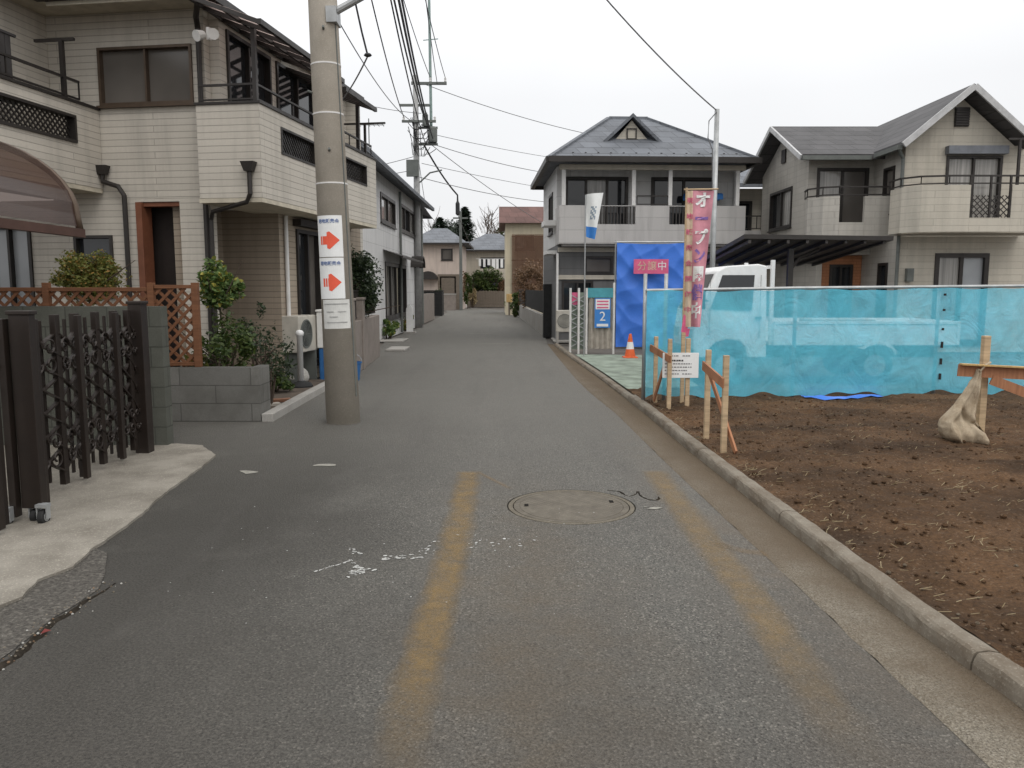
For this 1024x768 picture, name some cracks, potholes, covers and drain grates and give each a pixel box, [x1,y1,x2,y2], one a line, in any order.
crack [0,583,116,671]
manhole cover [508,490,635,525]
crack [607,490,660,501]
